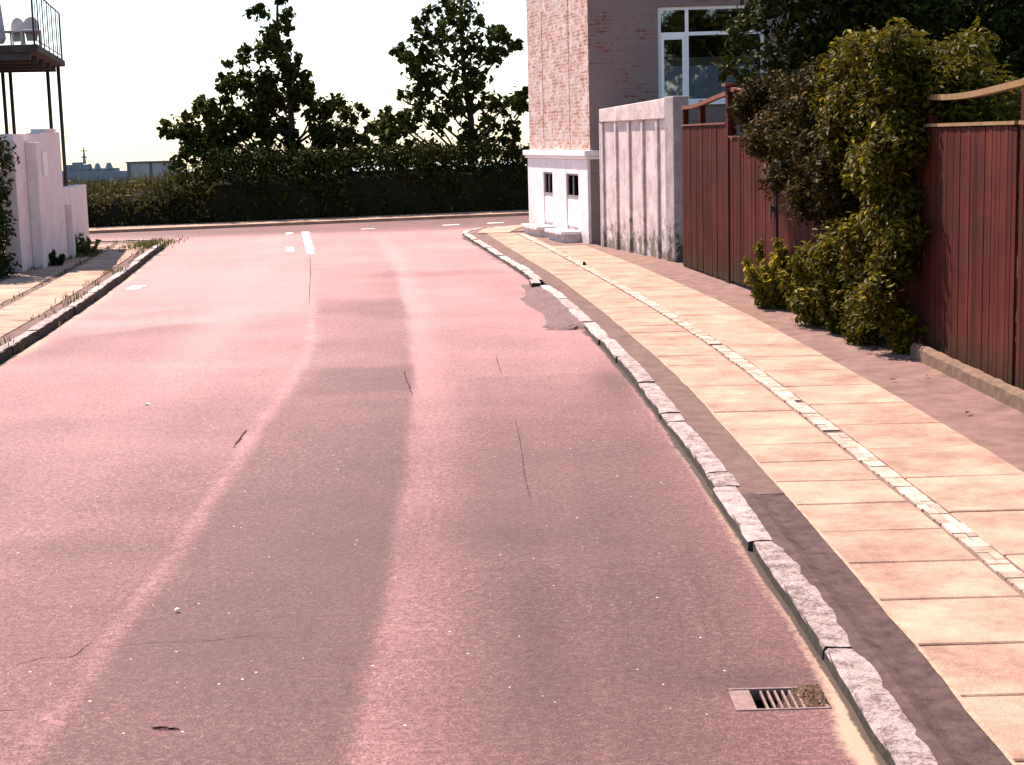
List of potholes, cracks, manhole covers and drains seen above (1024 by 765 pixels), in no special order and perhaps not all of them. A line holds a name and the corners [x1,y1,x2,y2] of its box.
crack [515,419,532,504]
drain grate [728,683,831,711]
